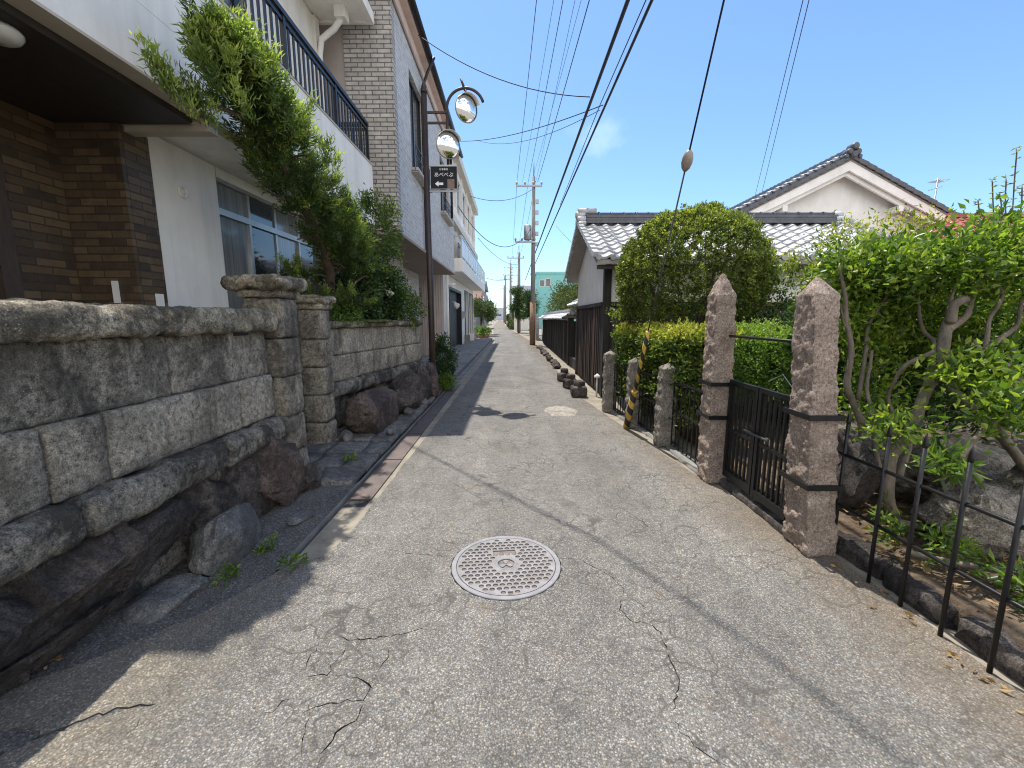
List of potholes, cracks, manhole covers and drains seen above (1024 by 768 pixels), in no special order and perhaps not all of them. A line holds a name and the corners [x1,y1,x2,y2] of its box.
crack [264,628,423,765]
crack [569,558,729,767]
manhole cover [450,536,562,601]
